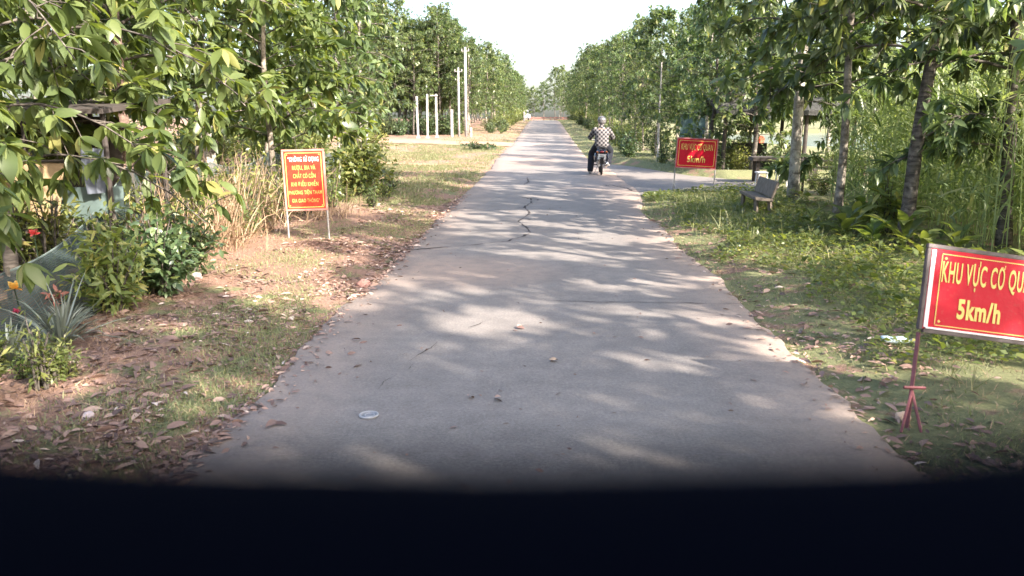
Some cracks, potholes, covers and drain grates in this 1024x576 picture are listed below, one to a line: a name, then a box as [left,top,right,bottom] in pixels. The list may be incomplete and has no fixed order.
crack [412,178,539,250]
